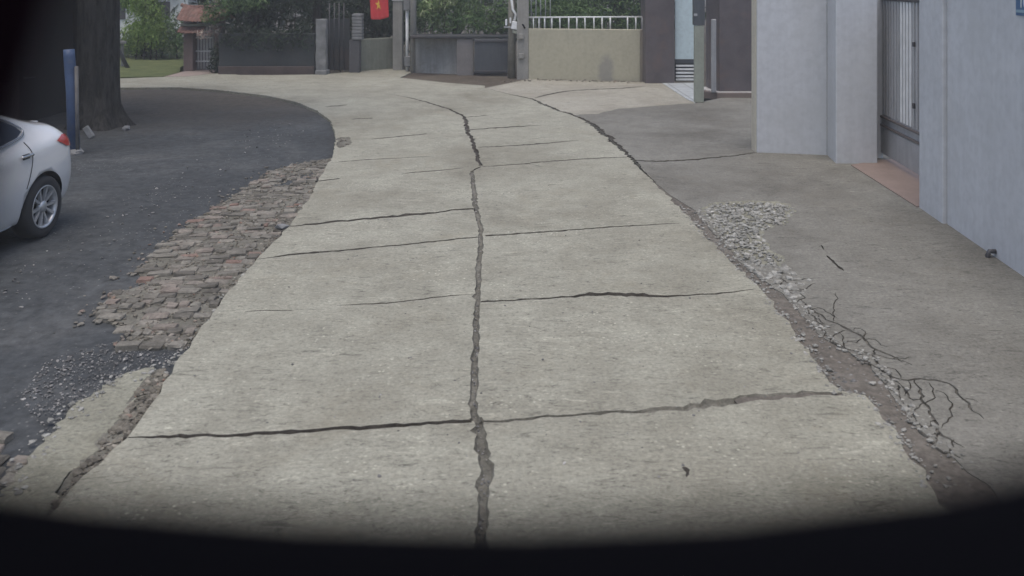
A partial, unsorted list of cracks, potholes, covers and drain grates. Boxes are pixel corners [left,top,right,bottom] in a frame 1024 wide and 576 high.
crack [123,86,842,514]
pothole [700,200,797,267]
crack [780,278,984,459]
